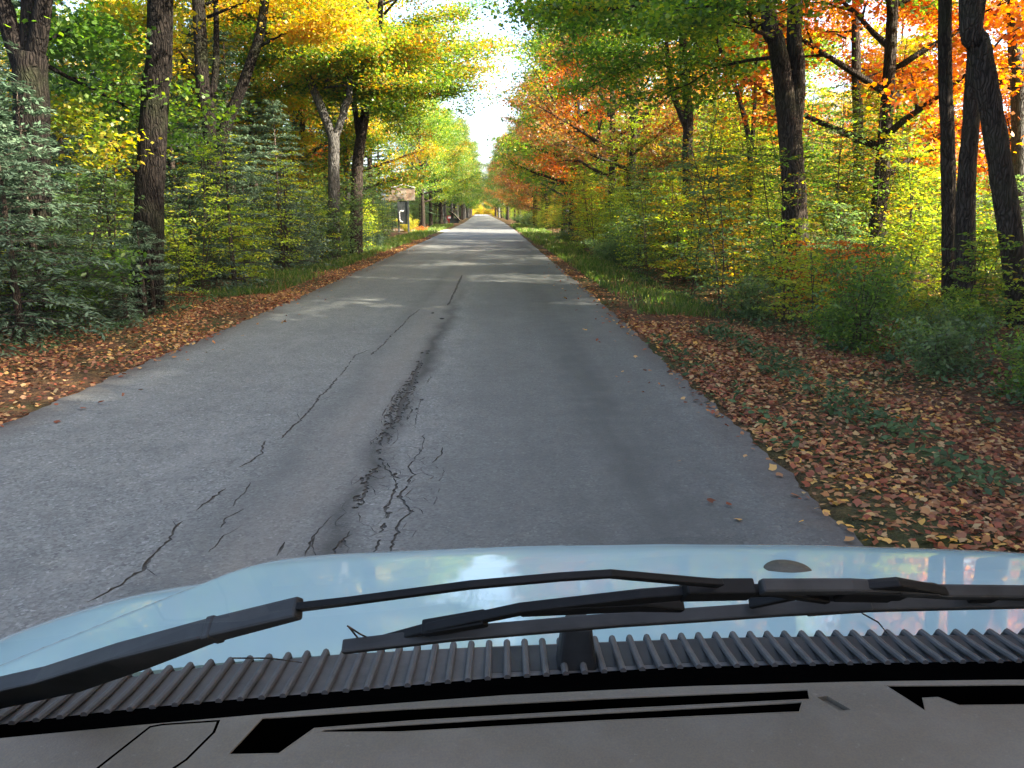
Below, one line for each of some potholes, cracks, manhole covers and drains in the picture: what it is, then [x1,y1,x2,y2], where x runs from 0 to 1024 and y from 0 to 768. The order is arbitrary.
crack [88,309,420,602]
